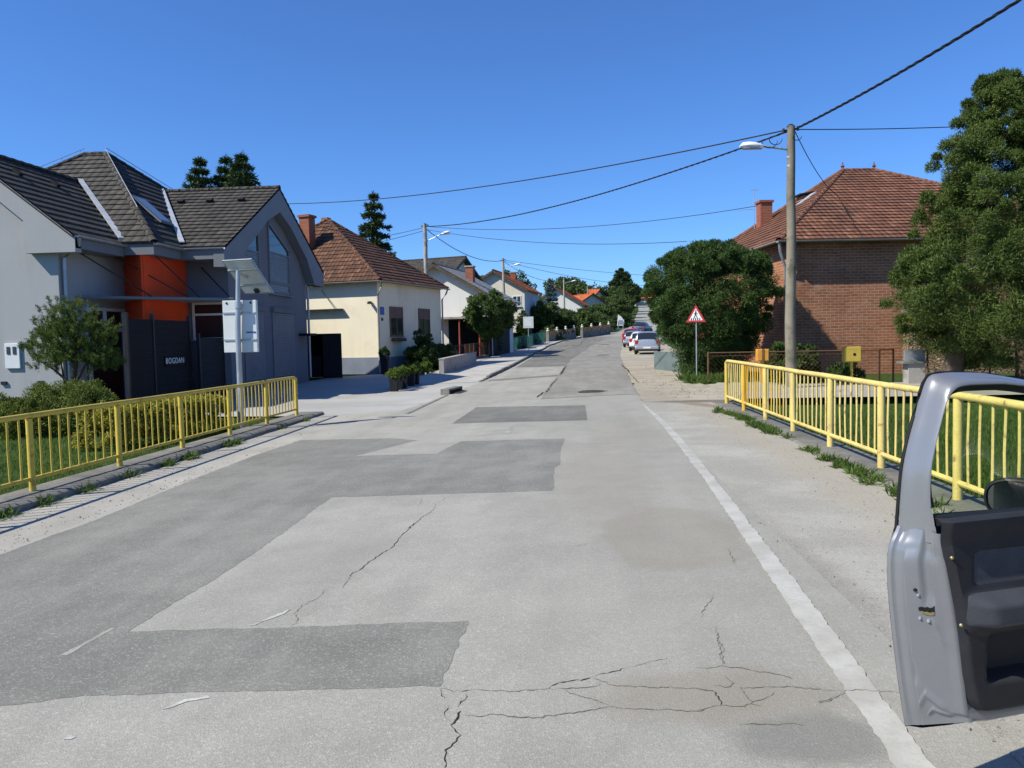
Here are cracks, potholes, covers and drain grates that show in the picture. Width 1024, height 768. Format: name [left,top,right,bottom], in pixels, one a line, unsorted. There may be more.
crack [288,498,445,628]
crack [440,596,896,767]
